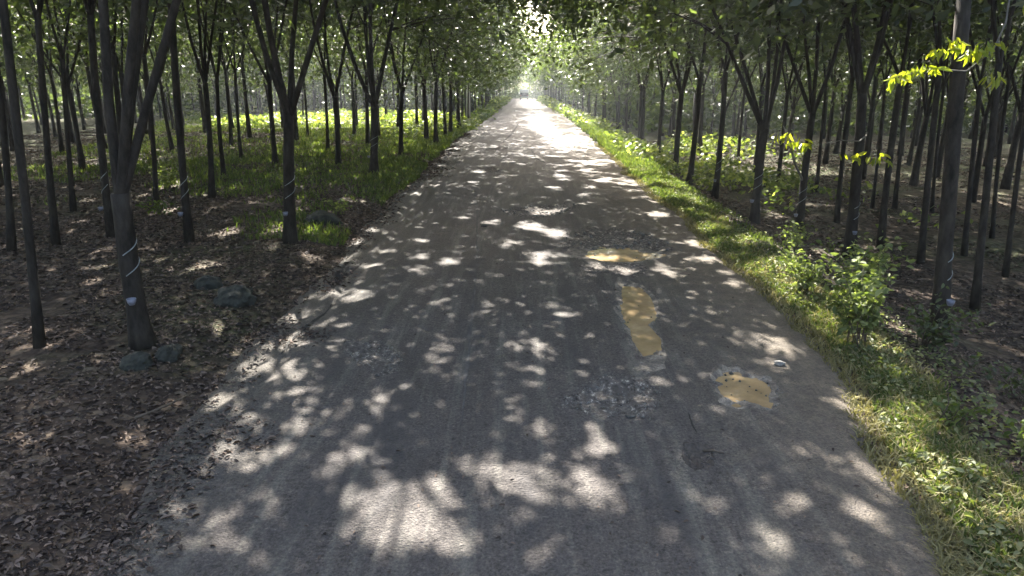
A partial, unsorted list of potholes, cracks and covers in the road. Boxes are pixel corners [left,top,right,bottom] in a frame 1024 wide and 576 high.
pothole [613,277,667,374]
pothole [557,373,661,420]
pothole [564,246,679,264]
pothole [341,338,404,376]
pothole [708,363,783,413]
pothole [680,441,716,471]
